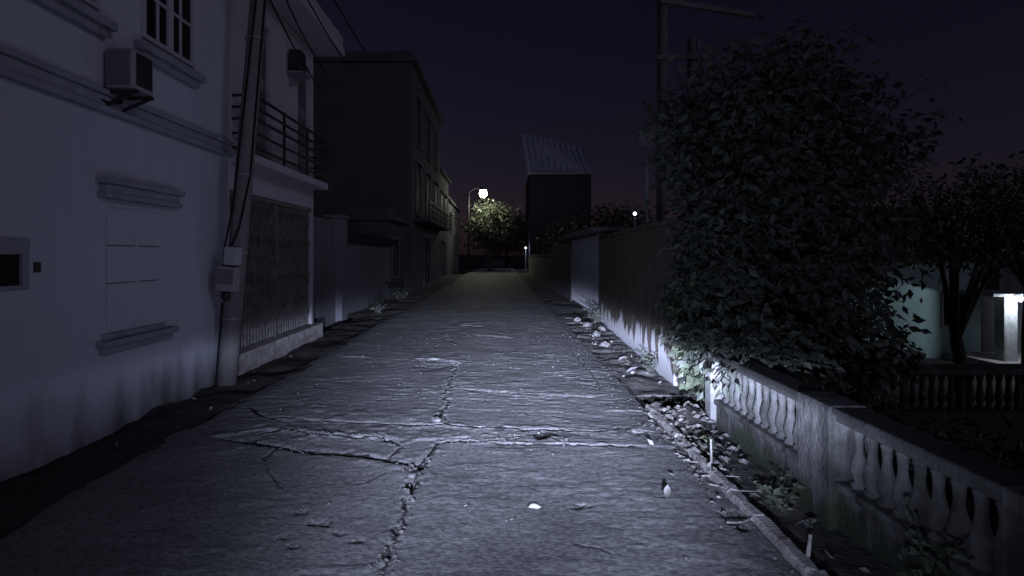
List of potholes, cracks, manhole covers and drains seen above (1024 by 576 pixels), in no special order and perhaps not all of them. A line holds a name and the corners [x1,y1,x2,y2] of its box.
crack [402,348,461,423]
crack [206,395,563,575]
